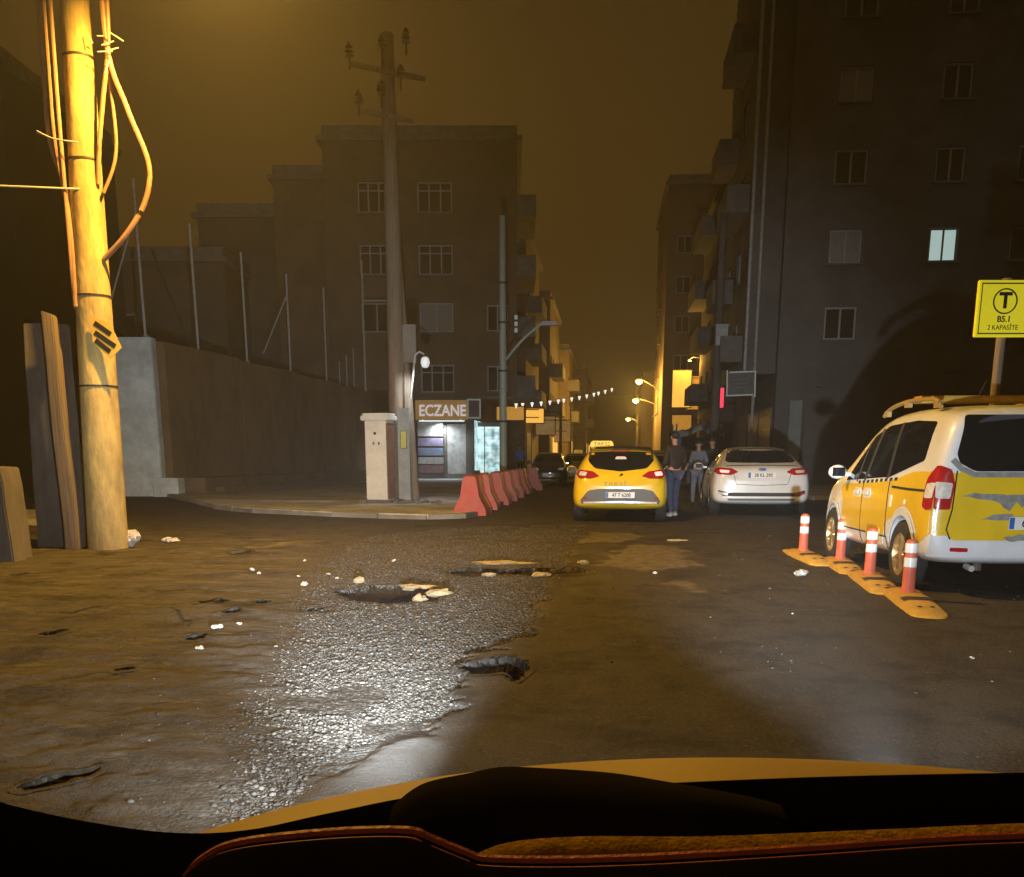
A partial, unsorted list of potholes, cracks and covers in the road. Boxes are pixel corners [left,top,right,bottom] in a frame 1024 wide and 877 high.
pothole [8,763,108,794]
pothole [214,606,250,616]
pothole [327,583,454,605]
crack [143,589,193,626]
pothole [177,632,213,642]
pothole [439,566,598,578]
pothole [452,655,536,683]
pothole [34,628,73,637]
